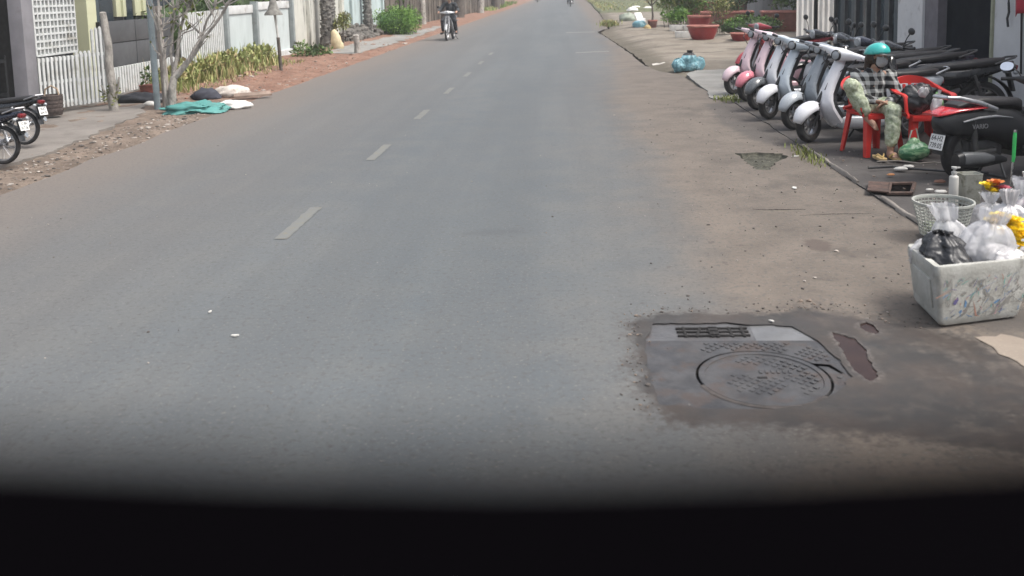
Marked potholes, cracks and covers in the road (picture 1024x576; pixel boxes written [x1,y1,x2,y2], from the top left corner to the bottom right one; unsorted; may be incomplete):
pothole [832,332,878,381]
pothole [735,152,788,170]
manhole cover [644,322,853,410]
pothole [860,322,879,334]
